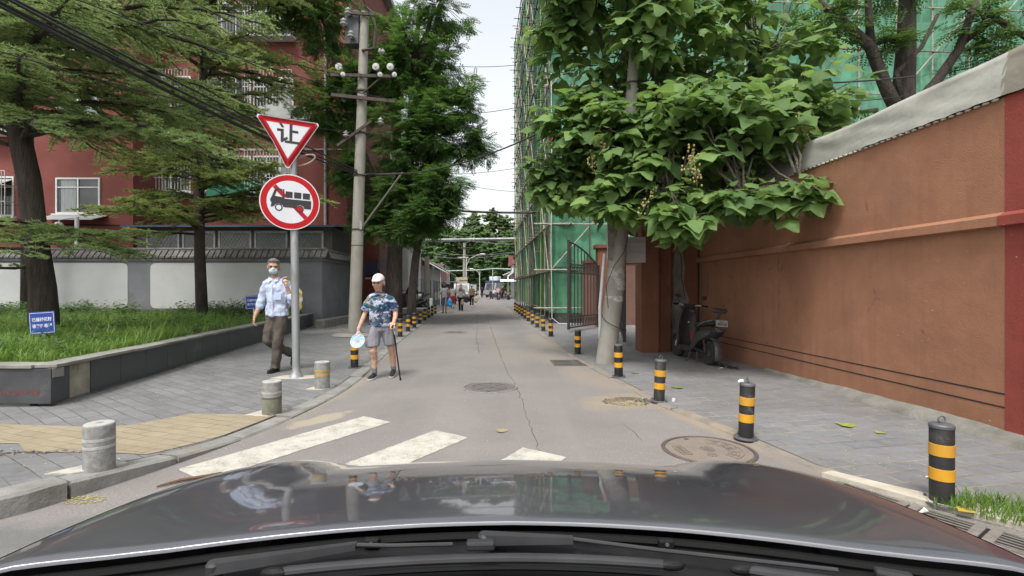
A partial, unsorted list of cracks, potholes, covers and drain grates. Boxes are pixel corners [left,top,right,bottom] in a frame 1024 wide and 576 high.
pothole [602,397,649,406]
manhole cover [661,436,759,463]
manhole cover [462,382,517,393]
